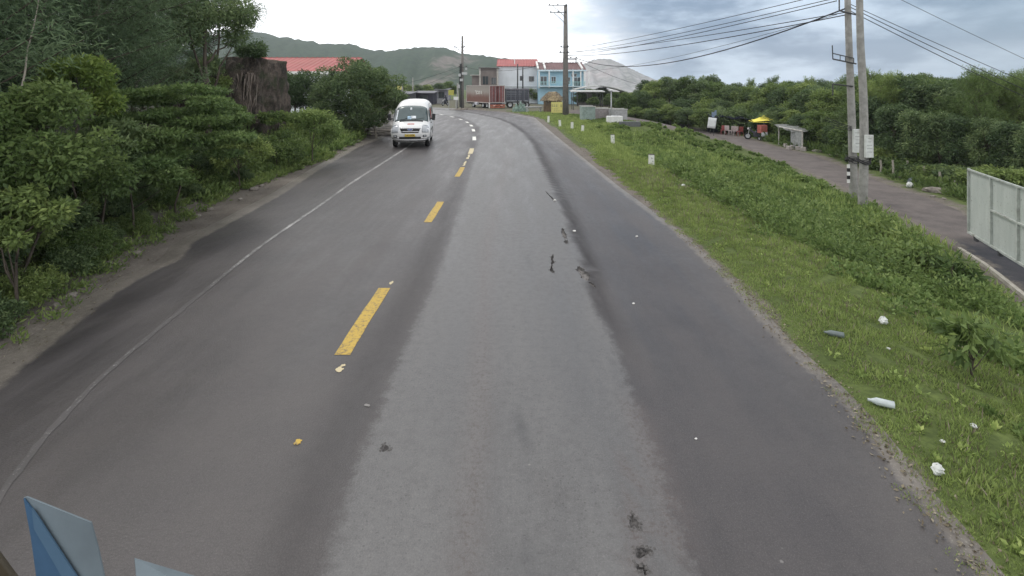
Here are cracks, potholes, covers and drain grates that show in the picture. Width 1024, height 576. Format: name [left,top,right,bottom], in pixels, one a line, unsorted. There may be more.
pothole [575,266,590,281]
pothole [631,545,656,563]
pothole [627,510,643,532]
pothole [634,562,652,576]
